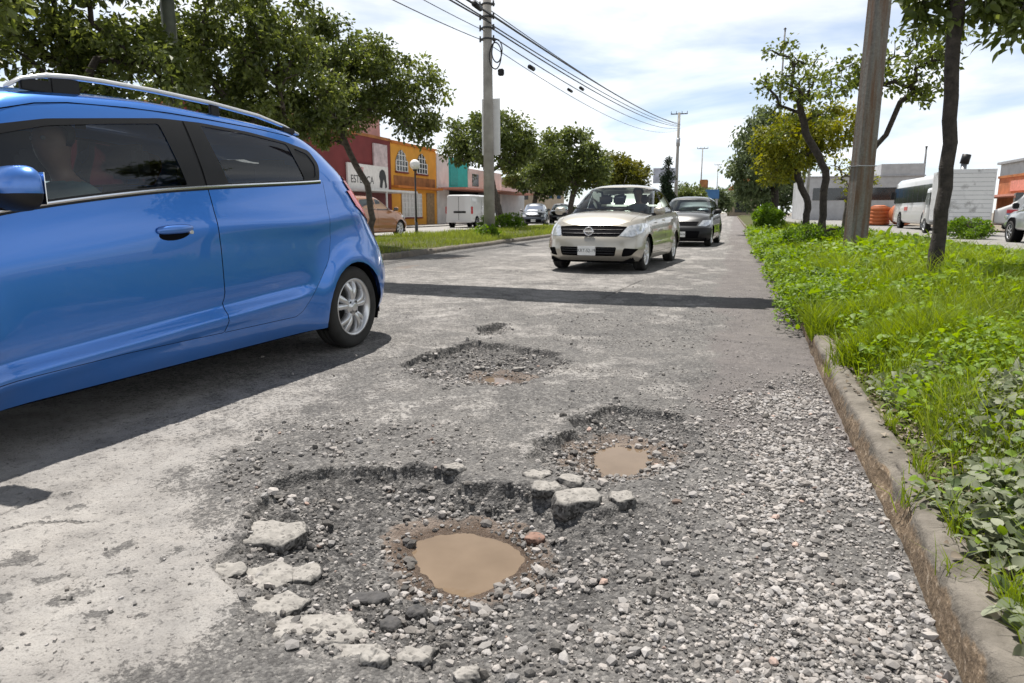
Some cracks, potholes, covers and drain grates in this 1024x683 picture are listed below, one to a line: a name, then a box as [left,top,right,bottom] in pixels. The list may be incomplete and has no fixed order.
pothole [476,323,508,335]
pothole [400,342,573,387]
pothole [526,406,717,485]
pothole [211,466,715,683]
